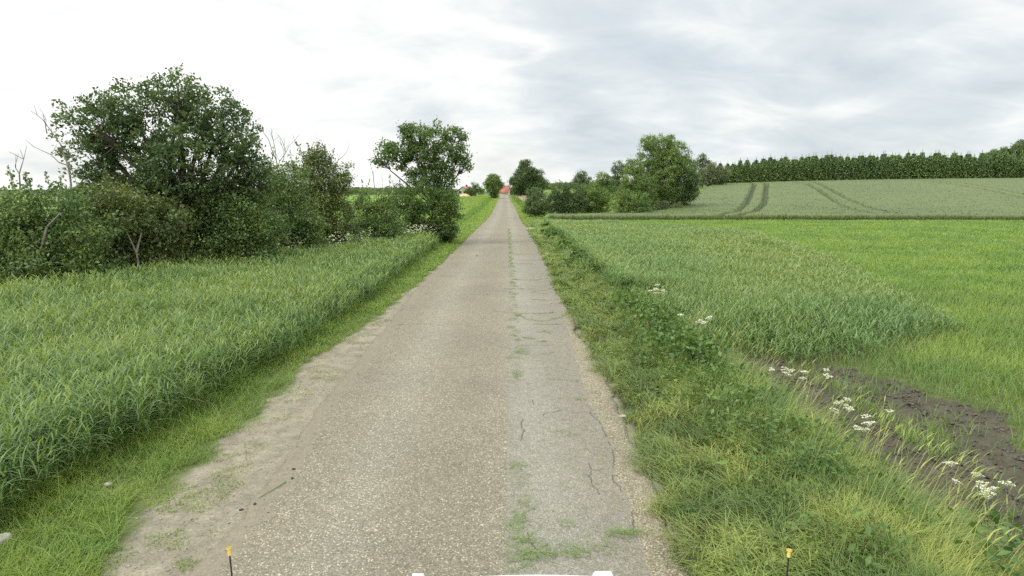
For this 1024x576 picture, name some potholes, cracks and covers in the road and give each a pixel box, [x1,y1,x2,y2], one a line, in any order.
crack [588,412,635,531]
